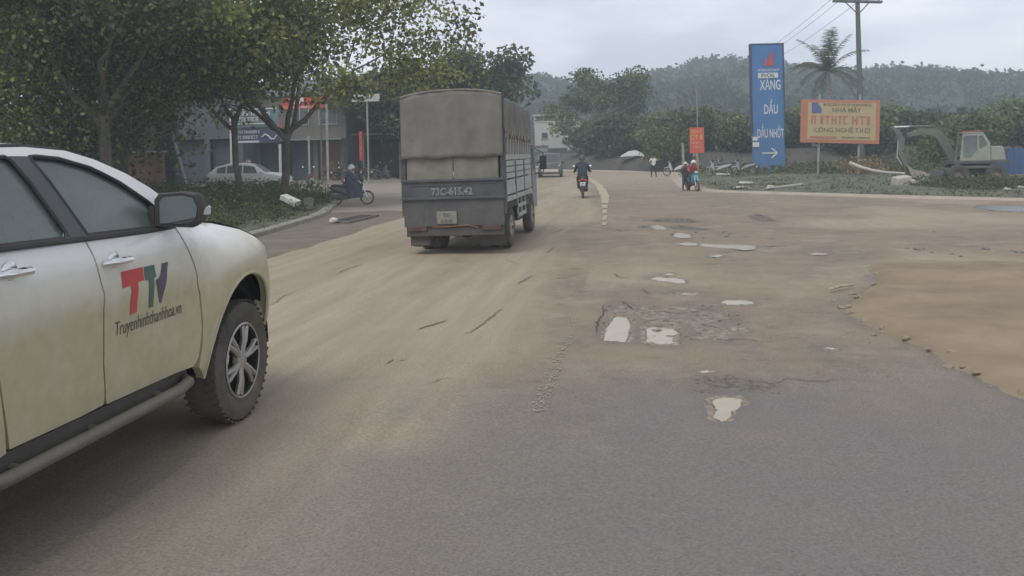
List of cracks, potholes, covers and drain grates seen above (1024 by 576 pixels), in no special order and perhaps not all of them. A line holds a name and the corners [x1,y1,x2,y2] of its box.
pothole [605,303,750,341]
pothole [704,395,750,422]
crack [467,308,502,333]
pothole [749,214,775,222]
pothole [719,298,756,306]
pothole [649,276,689,284]
pothole [638,325,685,346]
manhole cover [329,214,379,224]
pothole [599,314,637,343]
